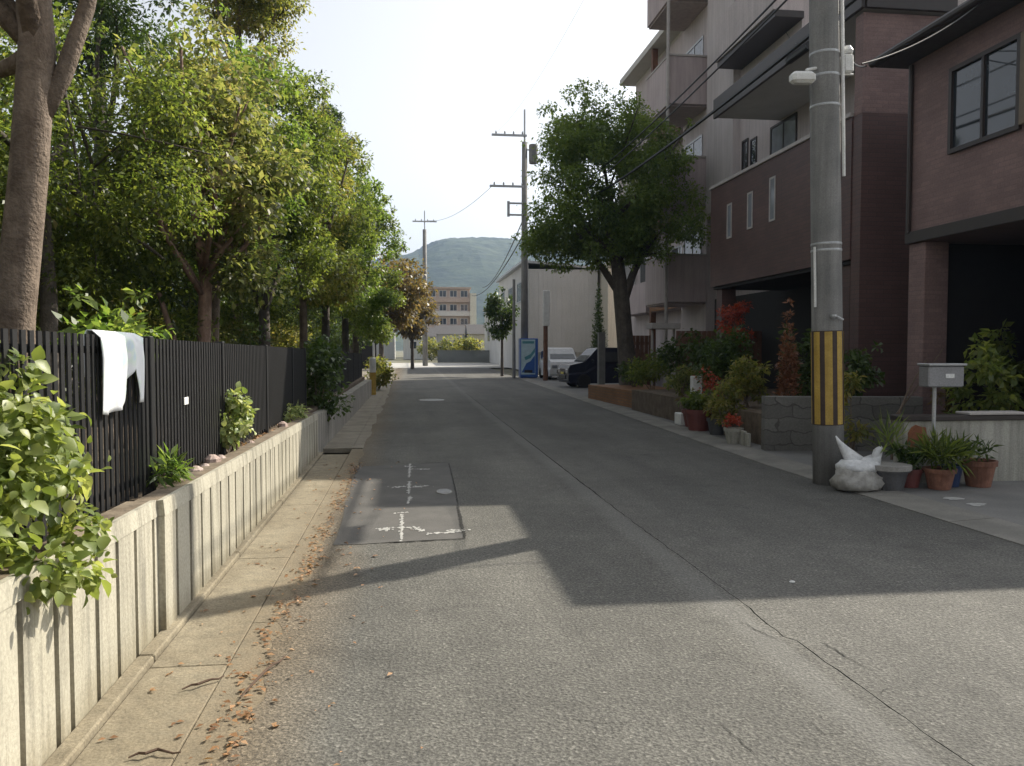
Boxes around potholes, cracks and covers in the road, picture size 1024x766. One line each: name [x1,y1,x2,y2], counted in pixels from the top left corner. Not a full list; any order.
crack [466,393,974,766]
